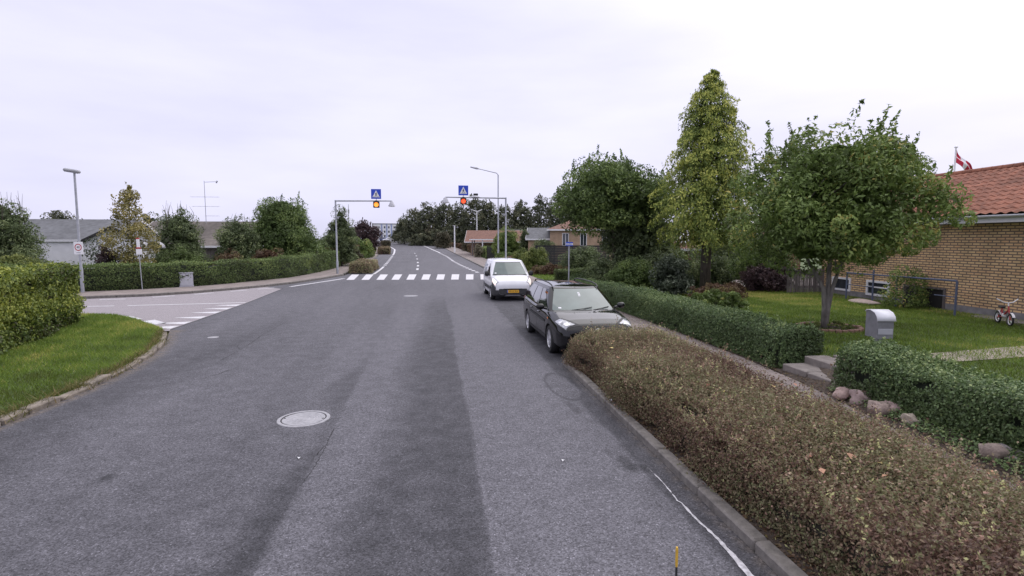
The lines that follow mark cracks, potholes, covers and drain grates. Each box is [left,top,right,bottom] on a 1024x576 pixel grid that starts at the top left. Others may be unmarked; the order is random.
manhole cover [276,410,330,427]
